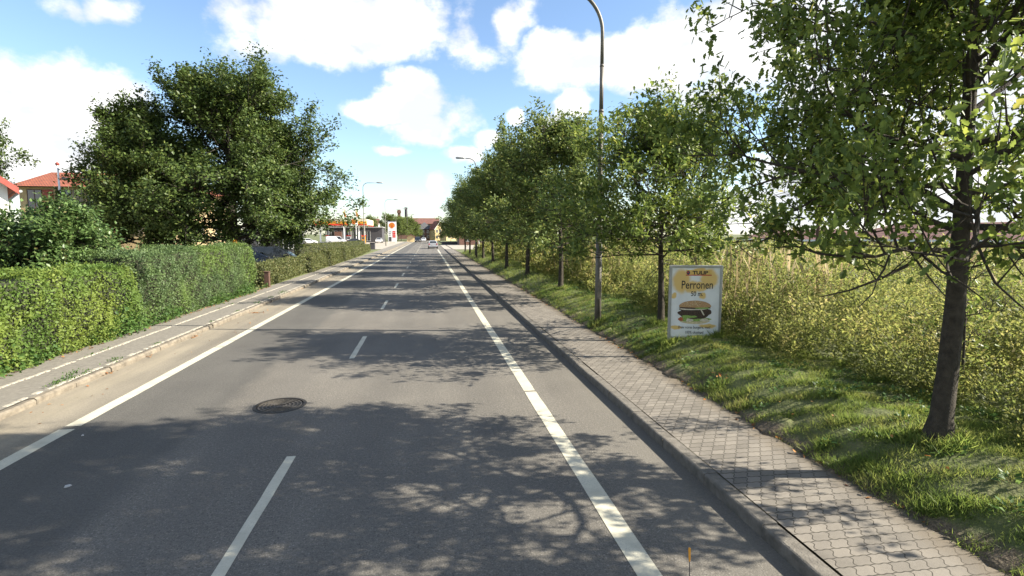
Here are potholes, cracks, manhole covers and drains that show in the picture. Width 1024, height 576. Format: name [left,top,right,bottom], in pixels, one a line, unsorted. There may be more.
manhole cover [253,397,307,414]
